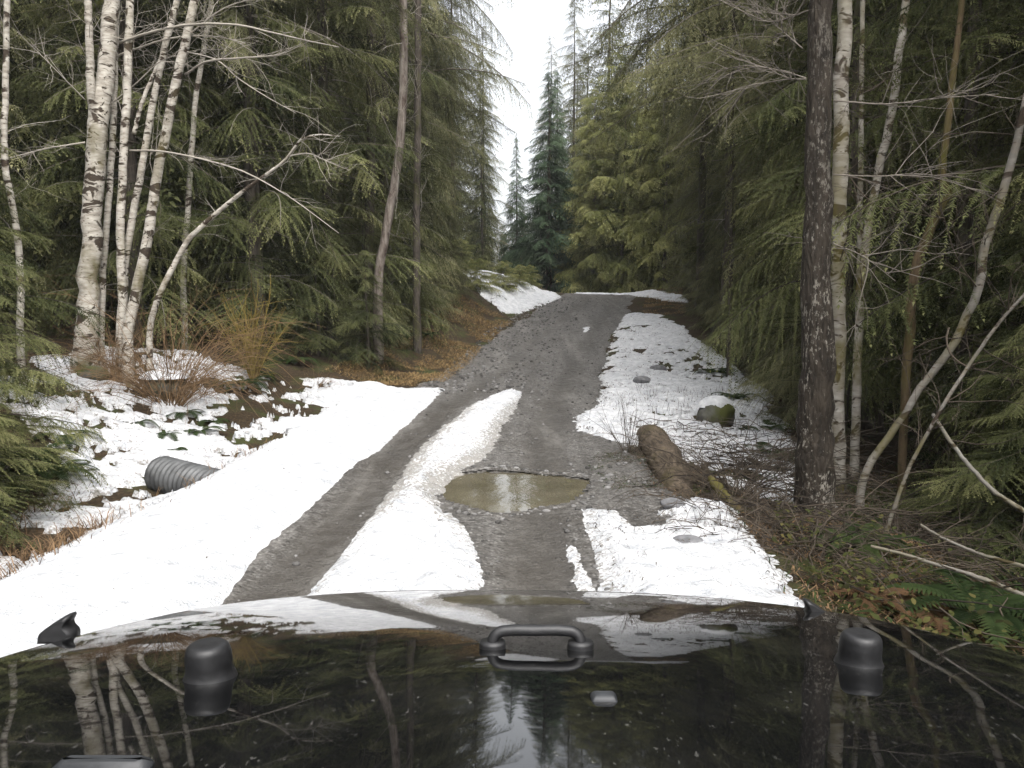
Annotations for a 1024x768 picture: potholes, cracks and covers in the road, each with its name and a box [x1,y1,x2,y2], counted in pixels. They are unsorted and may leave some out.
pothole [438,466,606,516]
